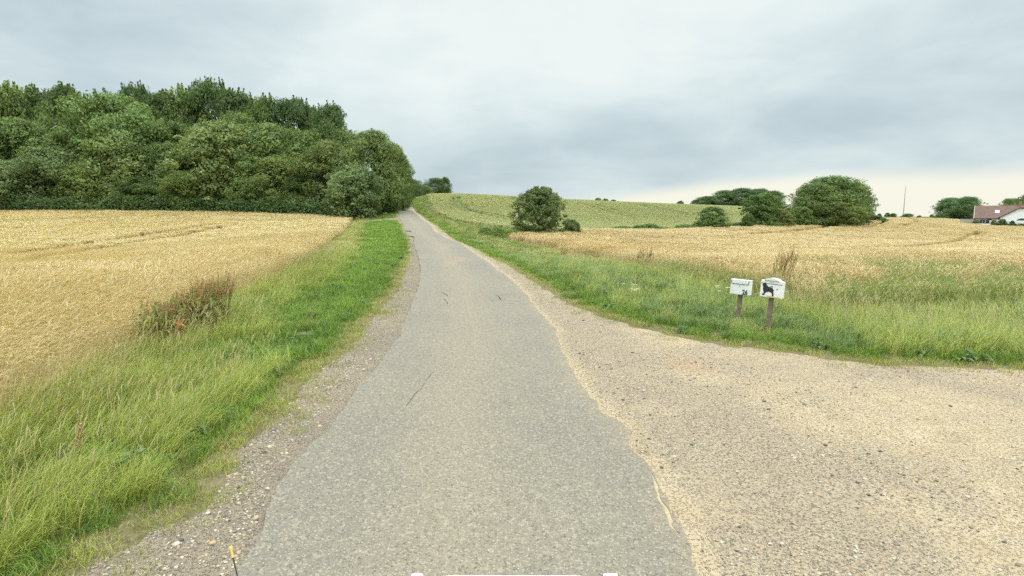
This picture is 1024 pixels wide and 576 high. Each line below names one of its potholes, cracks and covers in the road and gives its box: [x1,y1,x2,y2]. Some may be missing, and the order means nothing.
crack [652,474,679,534]
